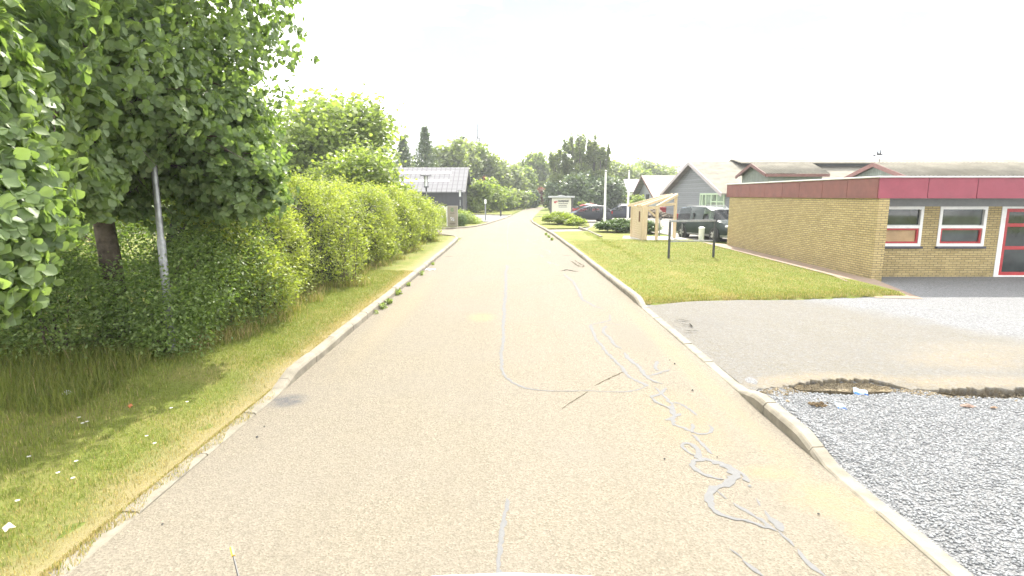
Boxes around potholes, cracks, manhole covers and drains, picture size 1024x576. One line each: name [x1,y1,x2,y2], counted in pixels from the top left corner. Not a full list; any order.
pothole [794,383,893,395]
pothole [938,391,1024,399]
